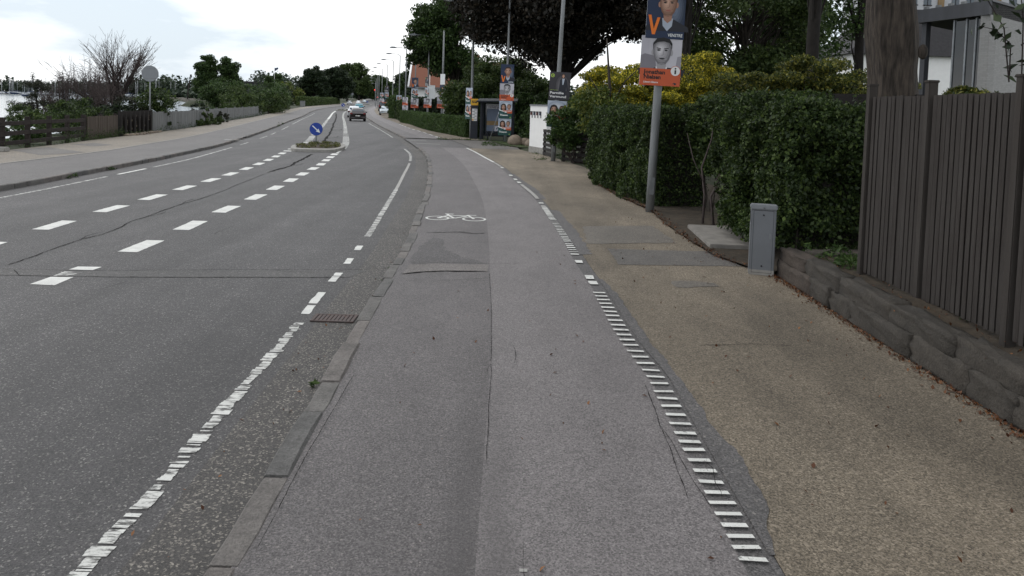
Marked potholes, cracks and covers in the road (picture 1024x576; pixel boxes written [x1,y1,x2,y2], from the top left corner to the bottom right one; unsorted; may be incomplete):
drain grate [310,313,358,323]
crack [644,383,722,508]
crack [10,113,382,288]
